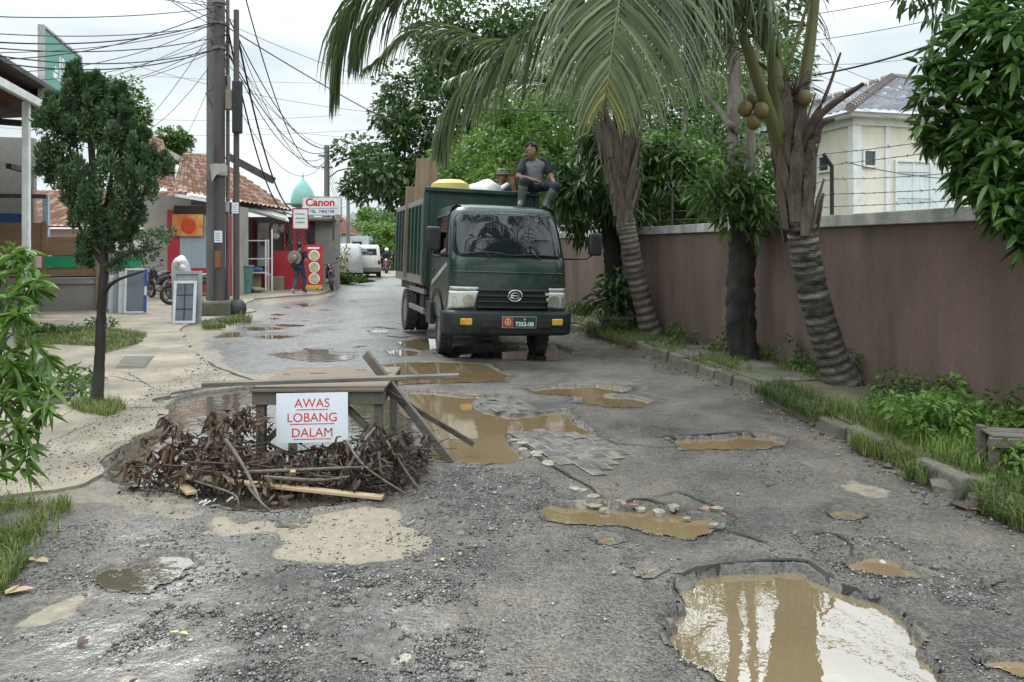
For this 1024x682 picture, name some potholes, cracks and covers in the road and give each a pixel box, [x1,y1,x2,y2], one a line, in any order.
pothole [398,388,598,466]
pothole [660,561,952,682]
pothole [972,648,1024,677]
crack [511,435,880,602]
pothole [90,550,205,593]
pothole [587,531,629,545]
pothole [664,432,788,451]
pothole [835,551,944,582]
pothole [524,383,657,408]
pothole [825,504,868,520]
